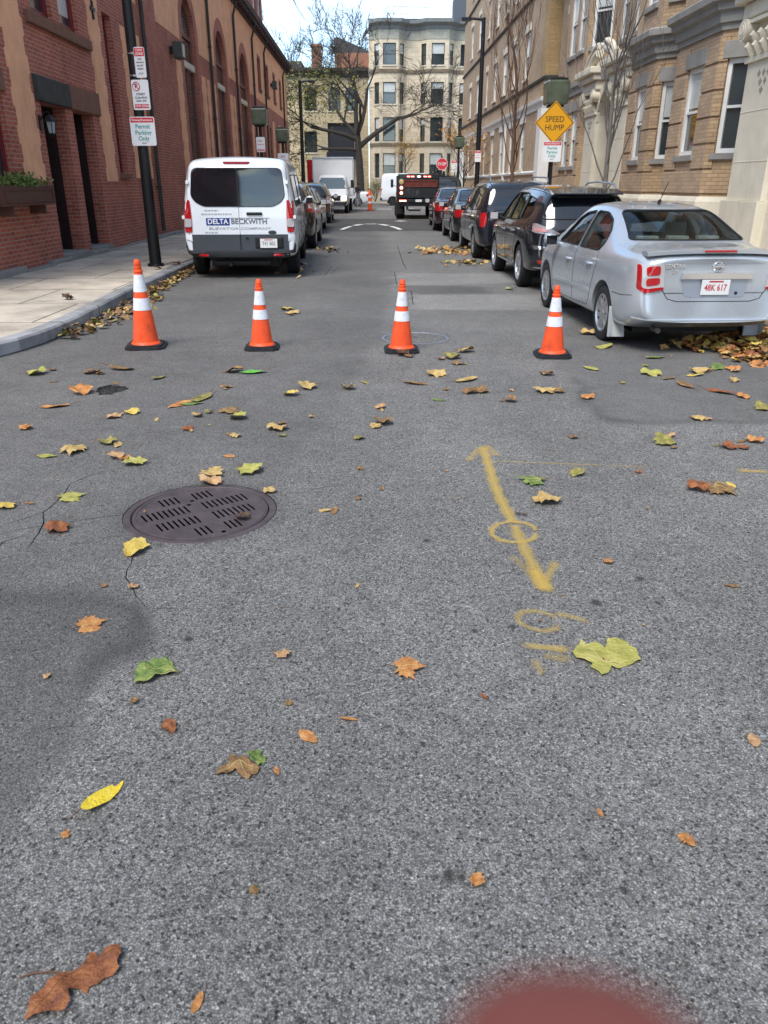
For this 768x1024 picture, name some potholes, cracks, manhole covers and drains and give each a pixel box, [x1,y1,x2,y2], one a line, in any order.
manhole cover [382,332,449,344]
manhole cover [122,485,277,544]
crack [0,471,124,549]
crack [125,551,161,610]
